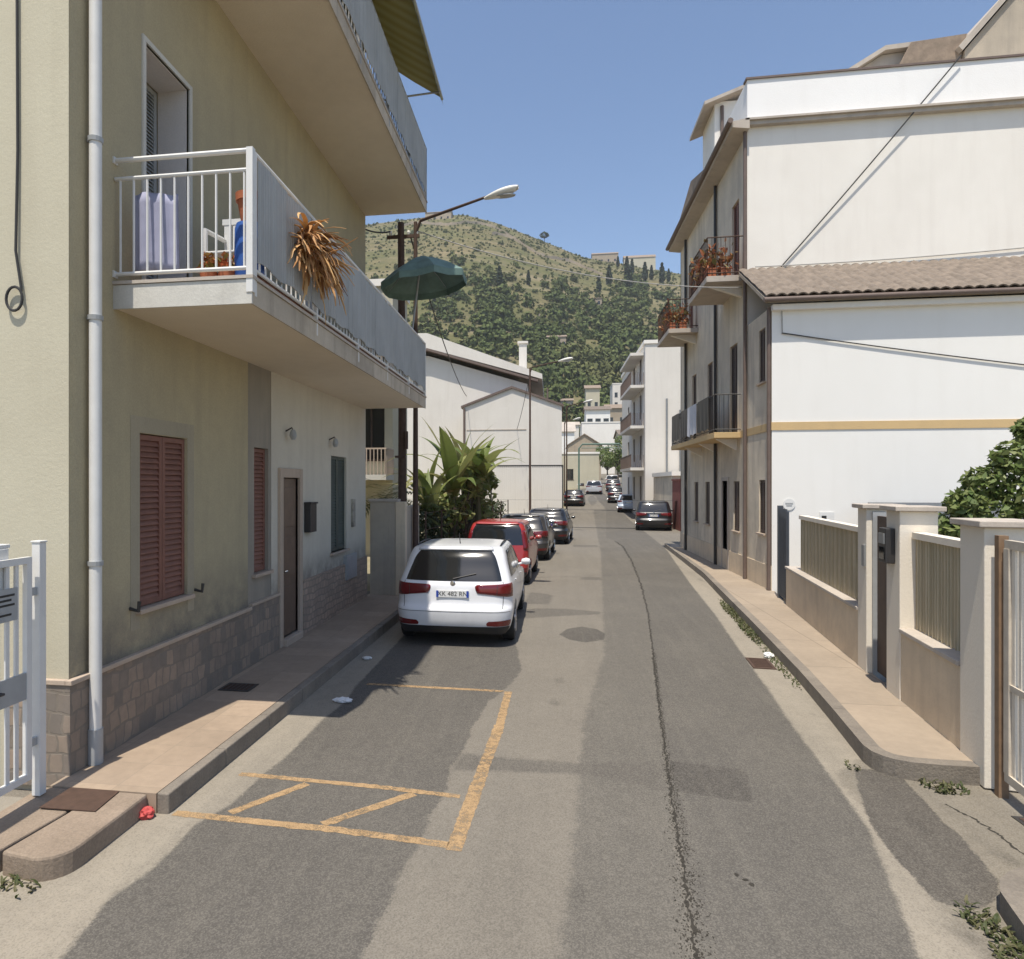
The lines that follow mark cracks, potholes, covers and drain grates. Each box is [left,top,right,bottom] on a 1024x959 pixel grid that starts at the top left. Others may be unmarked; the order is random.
crack [945,804,1024,854]
crack [617,542,754,959]
